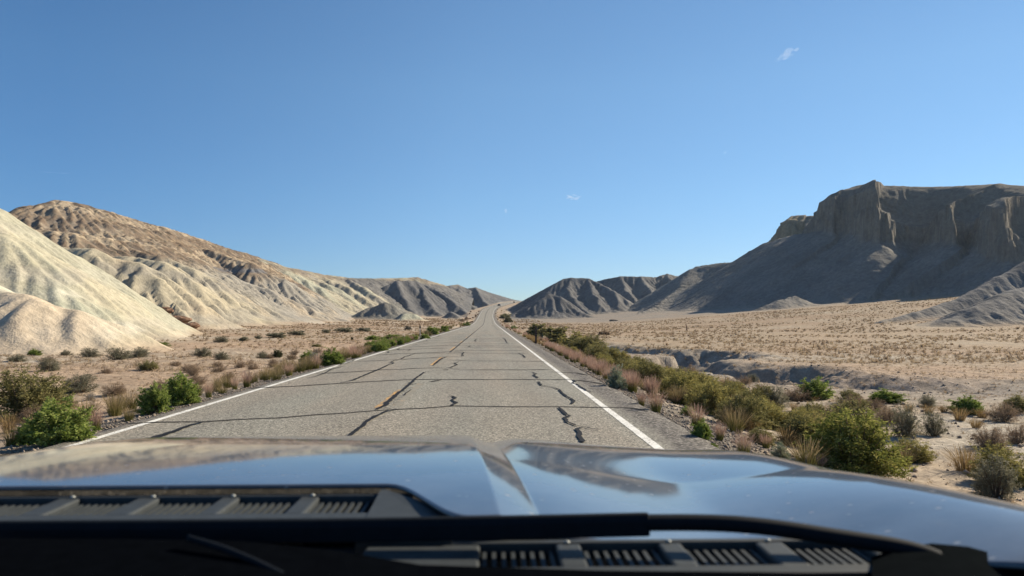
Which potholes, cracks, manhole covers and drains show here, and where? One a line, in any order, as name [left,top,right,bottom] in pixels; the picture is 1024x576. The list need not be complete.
crack [107,405,647,427]
crack [245,331,607,389]
